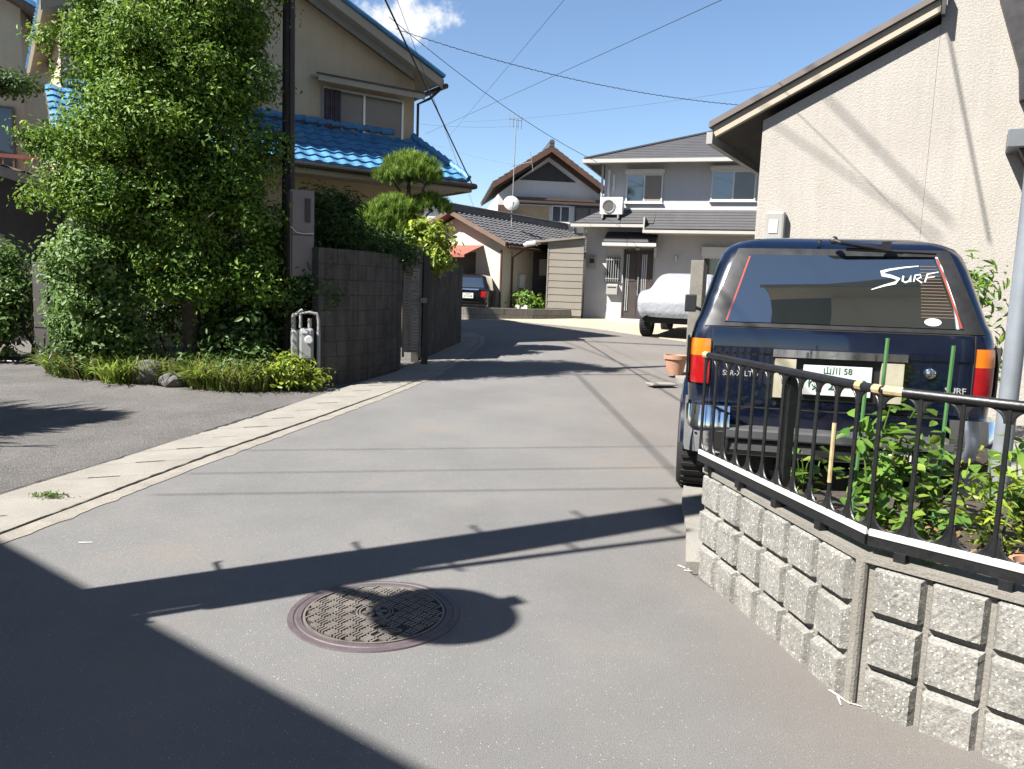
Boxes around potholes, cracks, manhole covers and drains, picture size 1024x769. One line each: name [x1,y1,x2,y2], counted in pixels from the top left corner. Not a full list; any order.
manhole cover [287,581,460,653]
